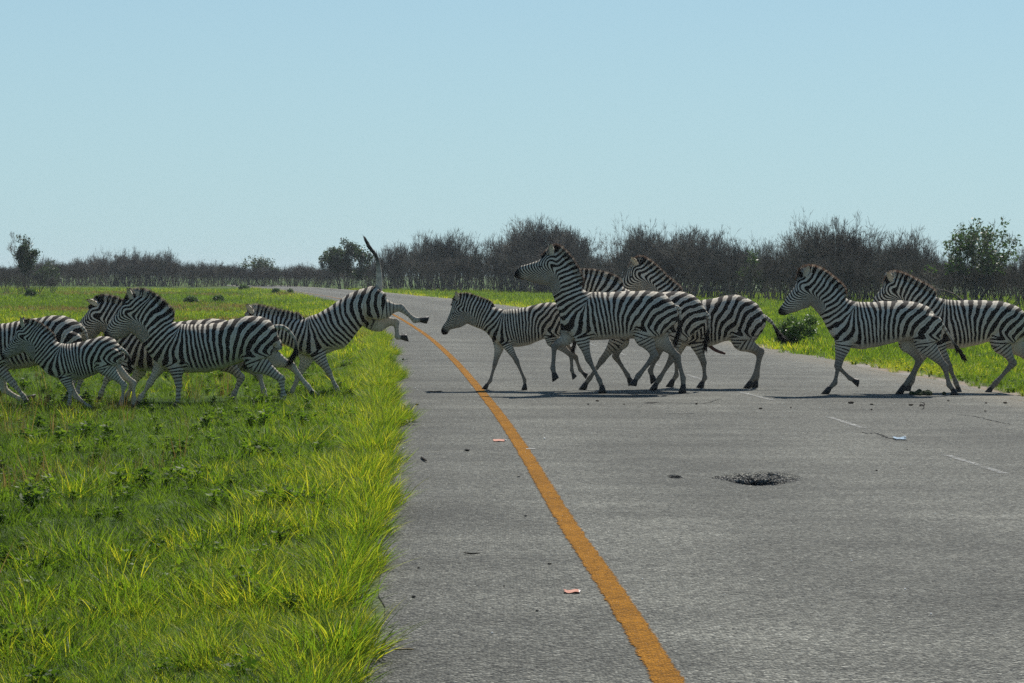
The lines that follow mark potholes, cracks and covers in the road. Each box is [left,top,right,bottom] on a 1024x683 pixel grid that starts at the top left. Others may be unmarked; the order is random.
pothole [708,472,803,486]
